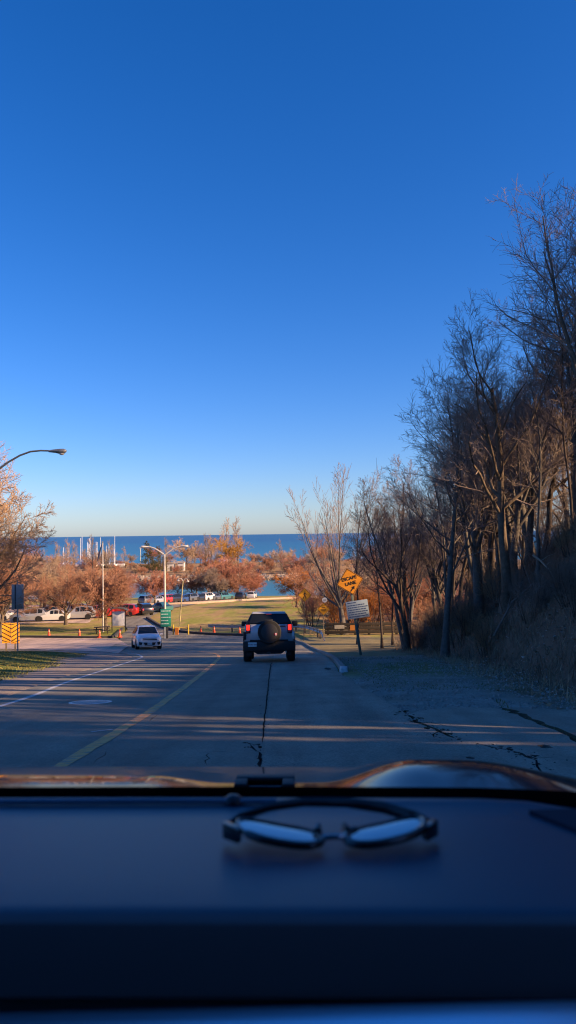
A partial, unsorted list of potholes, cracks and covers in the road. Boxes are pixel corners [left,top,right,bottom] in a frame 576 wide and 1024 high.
crack [243,663,272,767]
crack [394,707,576,771]
